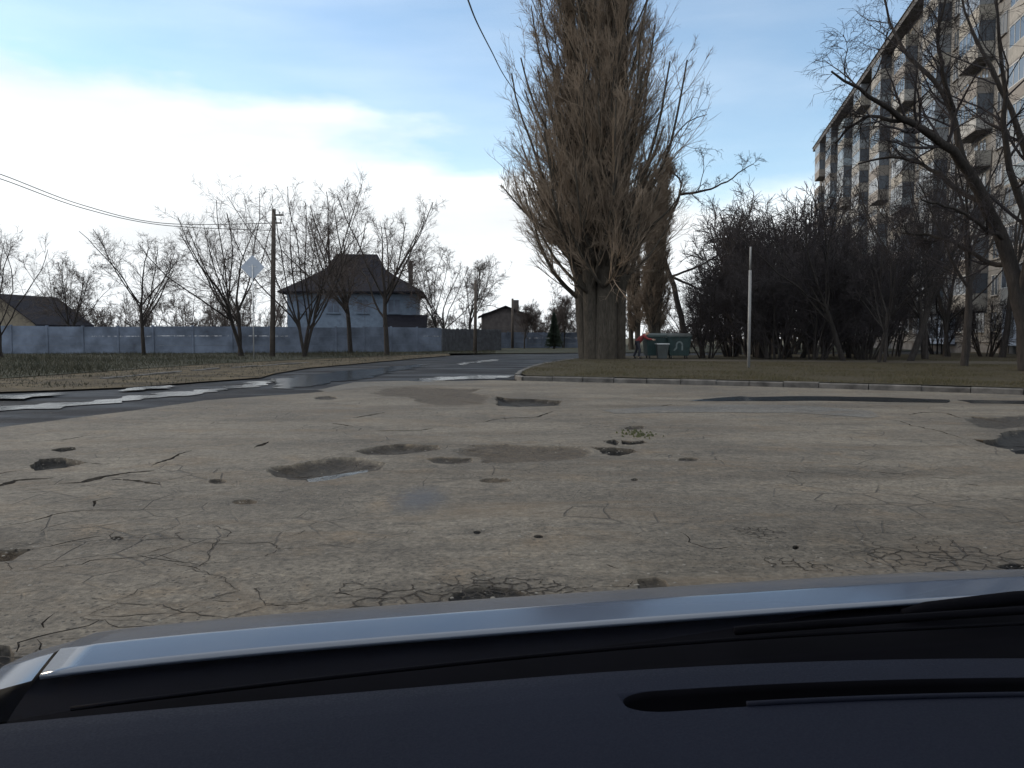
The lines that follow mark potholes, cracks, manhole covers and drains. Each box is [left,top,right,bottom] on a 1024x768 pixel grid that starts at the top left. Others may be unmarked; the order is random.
crack [841,536,1024,572]
crack [0,524,601,665]
pothole [354,444,441,455]
pothole [592,447,638,456]
crack [0,450,192,526]
crack [679,526,833,571]
pothole [0,549,33,562]
pothole [266,457,387,482]
pothole [495,396,562,407]
pothole [974,430,1024,451]
pothole [30,458,89,471]
